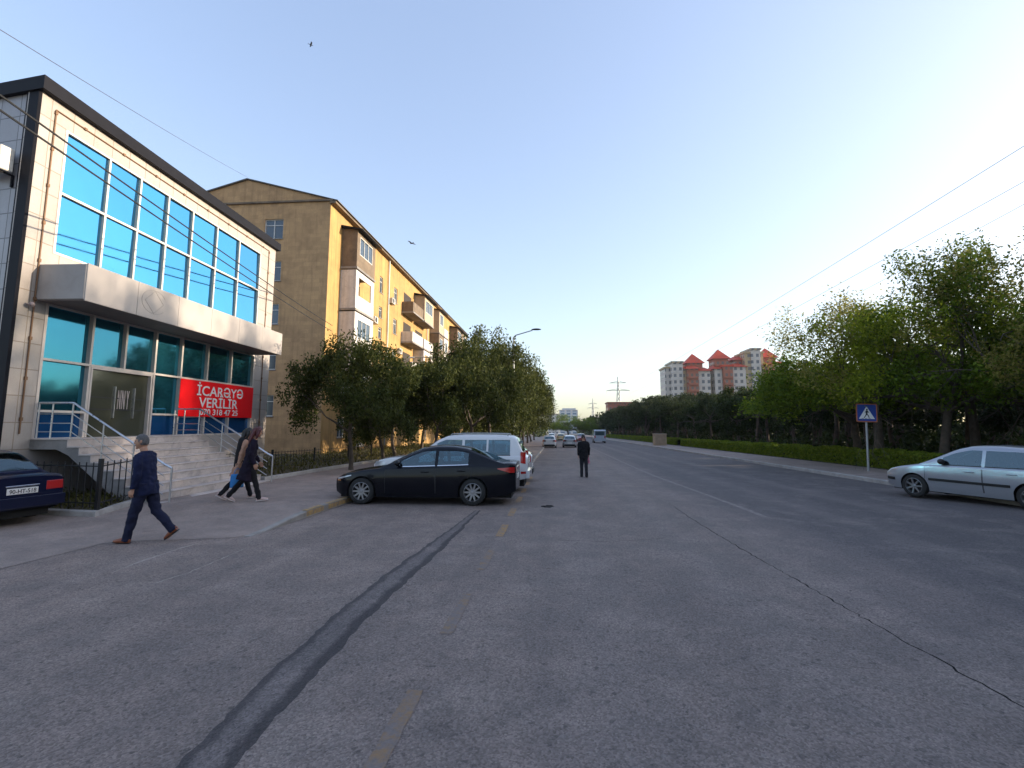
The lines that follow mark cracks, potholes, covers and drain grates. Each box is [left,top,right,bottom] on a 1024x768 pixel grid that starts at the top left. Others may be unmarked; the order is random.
crack [676,508,1023,707]
